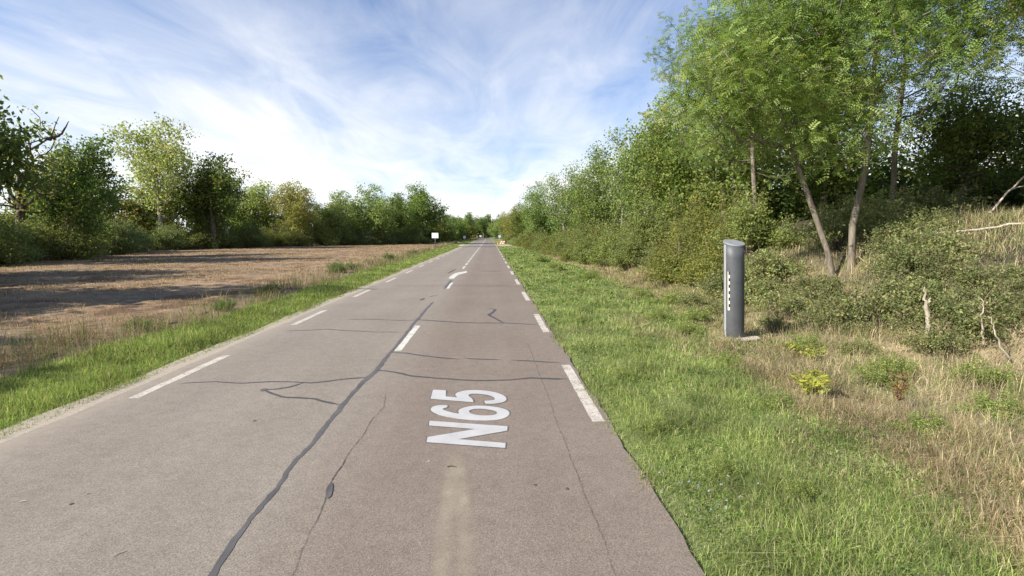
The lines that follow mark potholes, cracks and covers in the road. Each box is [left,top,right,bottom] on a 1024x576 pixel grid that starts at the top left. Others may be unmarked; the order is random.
crack [291,395,386,576]
crack [294,308,535,332]
